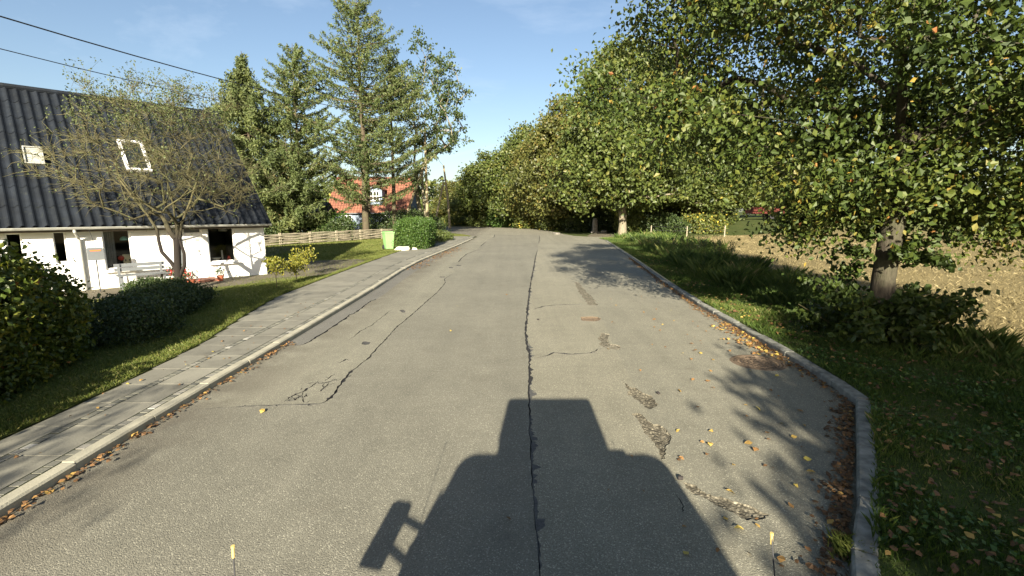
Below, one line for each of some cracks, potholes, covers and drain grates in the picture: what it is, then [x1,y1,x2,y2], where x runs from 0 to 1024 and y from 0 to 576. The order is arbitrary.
pothole [622,380,658,409]
crack [524,238,597,576]
crack [184,275,450,410]
pothole [598,333,620,350]
pothole [684,483,769,520]
pothole [632,413,672,460]
manhole cover [729,355,787,371]
